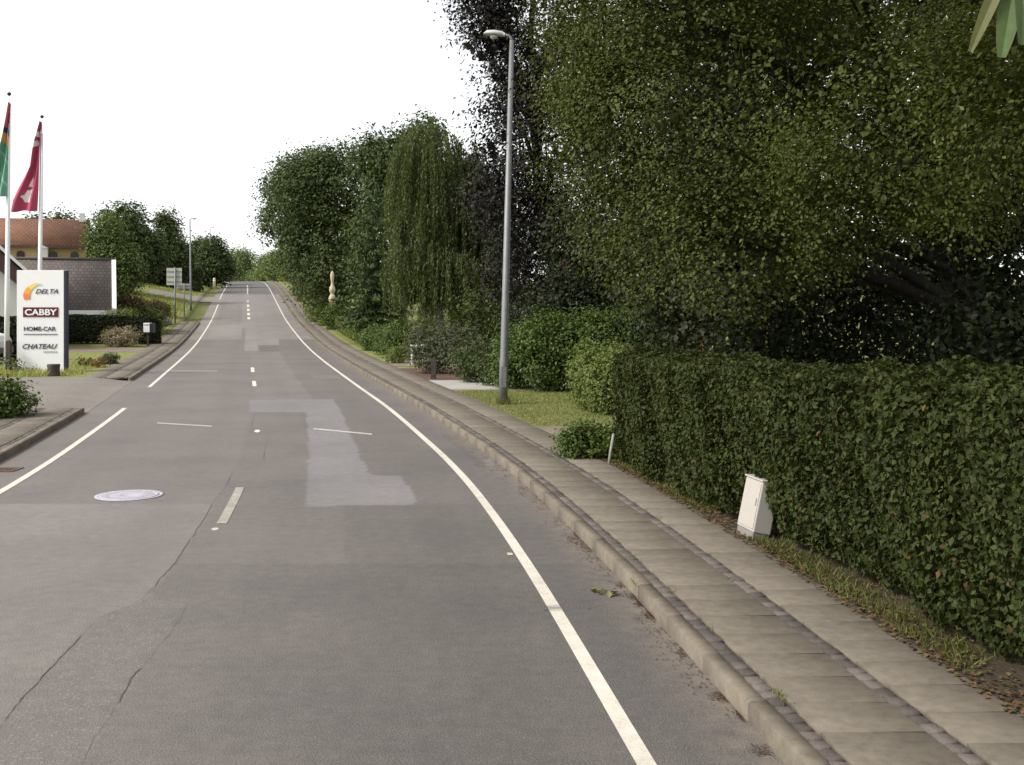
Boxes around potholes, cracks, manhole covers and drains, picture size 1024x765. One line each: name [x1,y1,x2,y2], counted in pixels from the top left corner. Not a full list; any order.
crack [80,604,187,765]
manhole cover [94,490,164,501]
crack [5,467,253,720]
